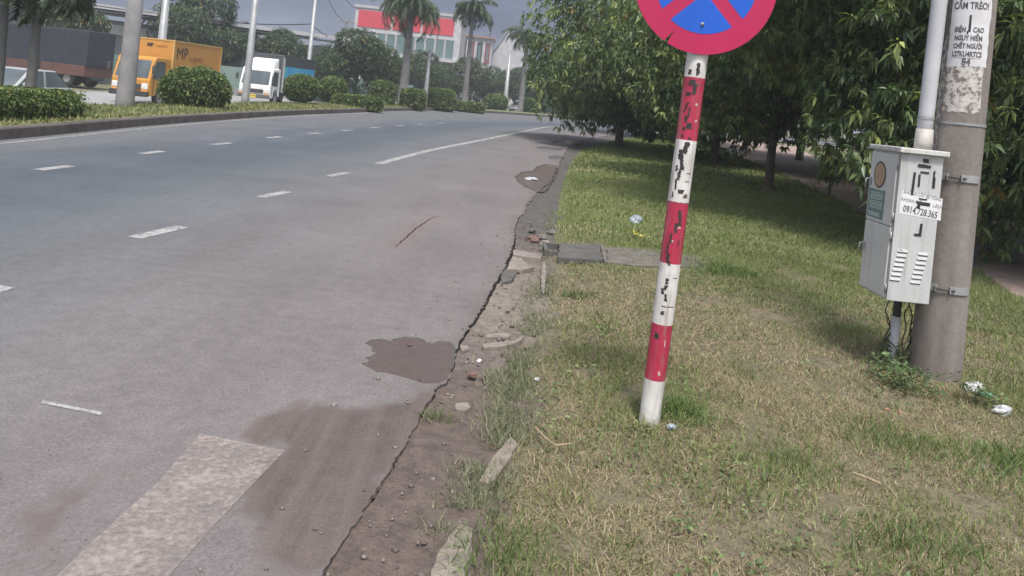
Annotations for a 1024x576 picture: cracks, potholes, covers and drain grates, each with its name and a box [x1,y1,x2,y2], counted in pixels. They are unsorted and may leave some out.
crack [322,234,516,576]
